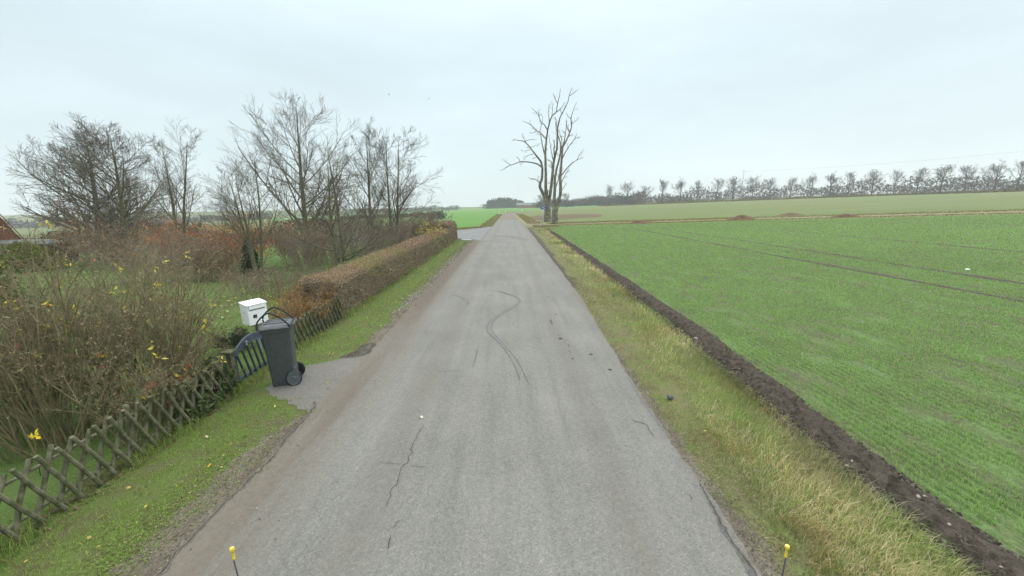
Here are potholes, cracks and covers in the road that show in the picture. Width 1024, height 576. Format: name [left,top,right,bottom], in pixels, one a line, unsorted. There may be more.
crack [383,425,424,549]
crack [628,378,665,436]
